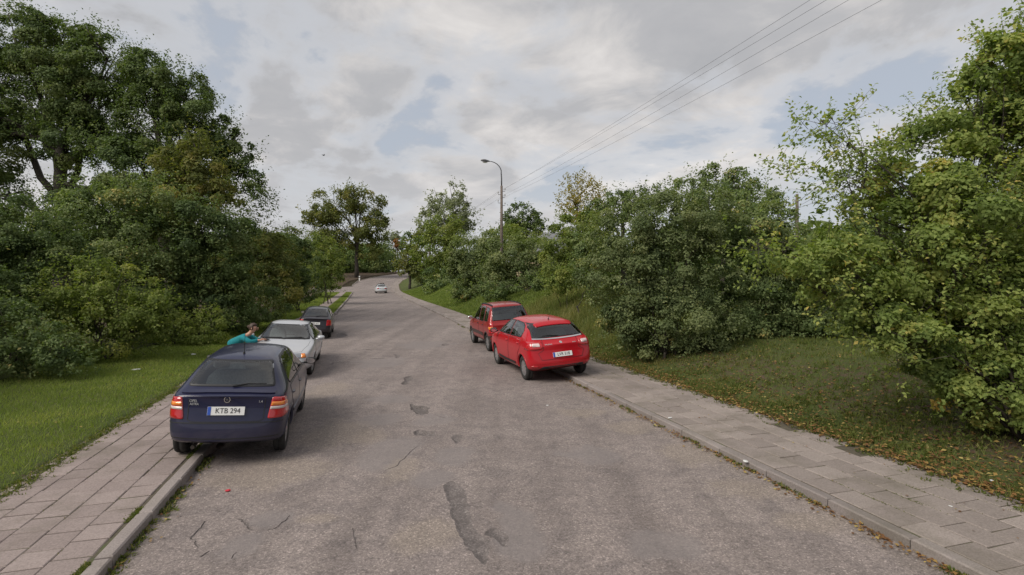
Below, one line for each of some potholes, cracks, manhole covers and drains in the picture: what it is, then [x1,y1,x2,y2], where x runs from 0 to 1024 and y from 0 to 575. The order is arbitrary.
crack [190,521,209,557]
crack [238,515,290,531]
pothole [484,528,509,547]
pothole [443,481,490,565]
pothole [410,404,430,415]
